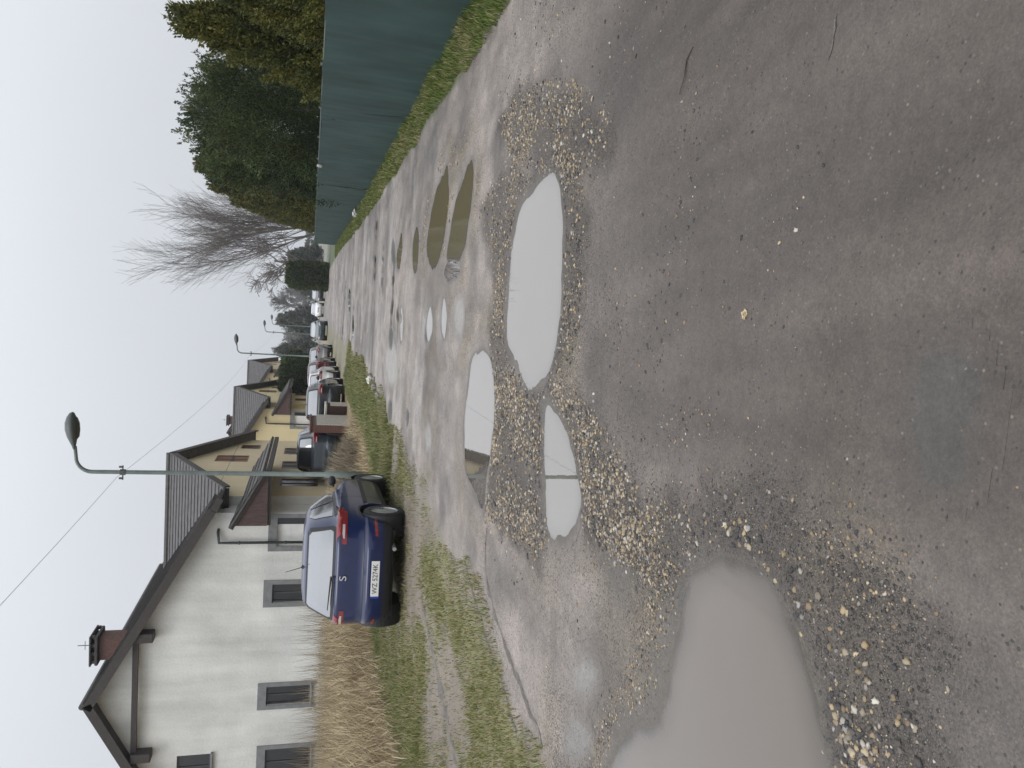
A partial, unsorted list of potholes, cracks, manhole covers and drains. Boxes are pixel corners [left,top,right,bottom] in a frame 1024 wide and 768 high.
pothole [461,340,496,518]
pothole [538,388,584,556]
pothole [444,151,475,265]
pothole [425,299,433,348]
crack [827,13,837,61]
pothole [425,157,449,275]
pothole [411,222,419,279]
pothole [596,530,848,768]
pothole [502,163,567,402]
pothole [439,290,447,346]
